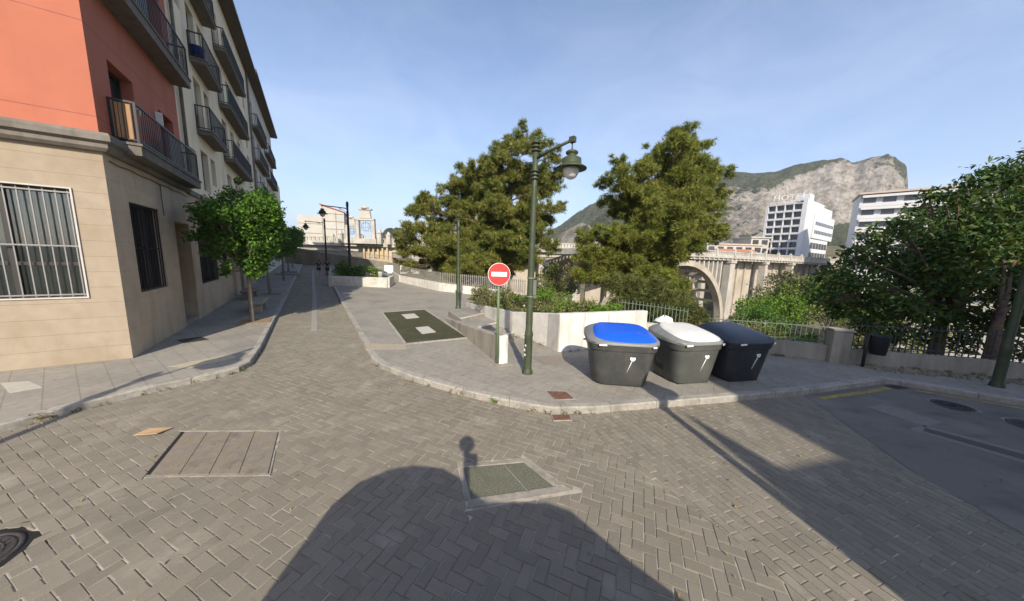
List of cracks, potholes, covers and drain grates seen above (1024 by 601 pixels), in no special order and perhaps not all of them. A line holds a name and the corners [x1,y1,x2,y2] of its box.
utility cover [144,432,278,478]
manhole cover [926,398,983,414]
utility cover [459,459,571,509]
manhole cover [0,527,54,567]
manhole cover [1000,417,1024,429]
